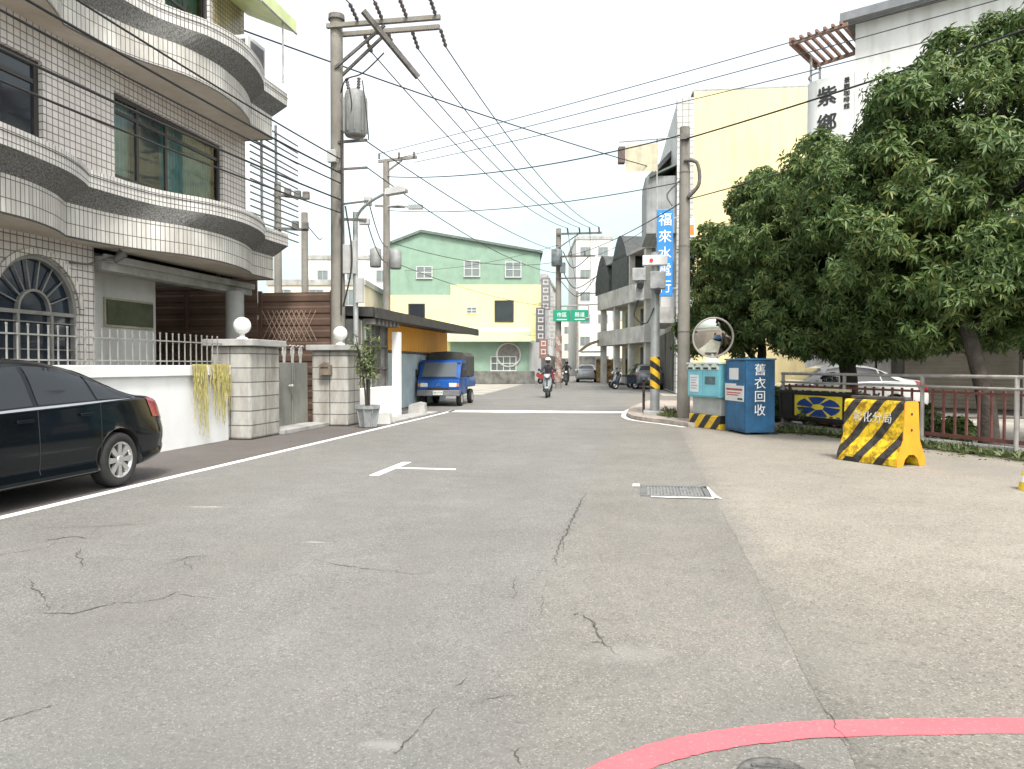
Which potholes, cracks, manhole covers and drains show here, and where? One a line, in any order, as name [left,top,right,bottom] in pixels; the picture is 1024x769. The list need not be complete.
crack [541,497,583,571]
crack [394,706,438,753]
manhole cover [737,757,805,769]
crack [1,523,148,568]
crack [577,612,616,654]
crack [28,578,211,614]
